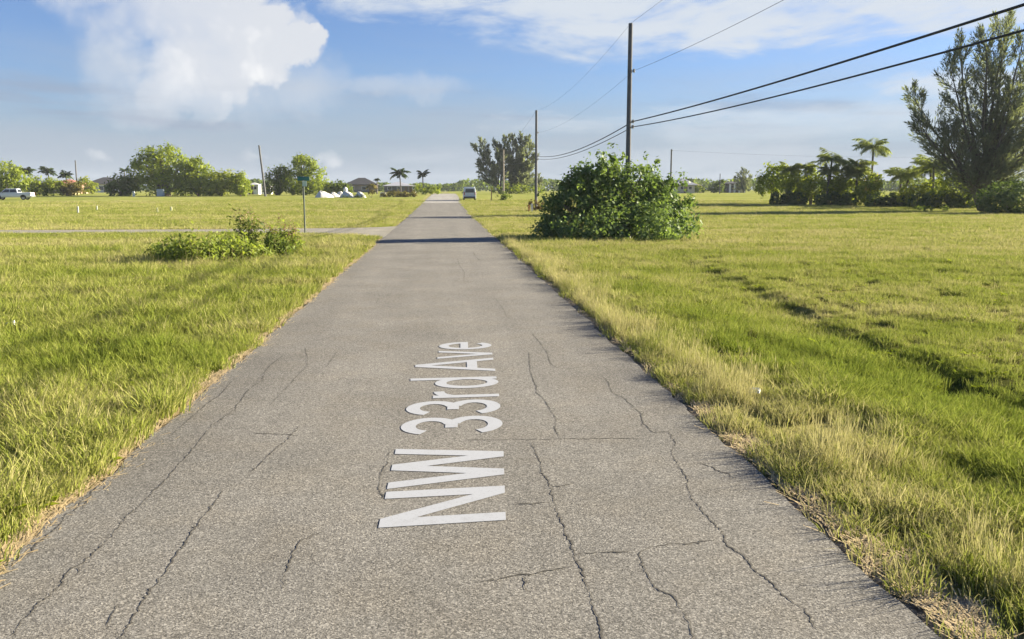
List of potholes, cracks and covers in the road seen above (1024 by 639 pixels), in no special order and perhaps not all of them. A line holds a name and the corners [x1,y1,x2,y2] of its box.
crack [250,425,300,472]
crack [282,531,323,587]
crack [472,334,818,639]
crack [13,355,283,634]
